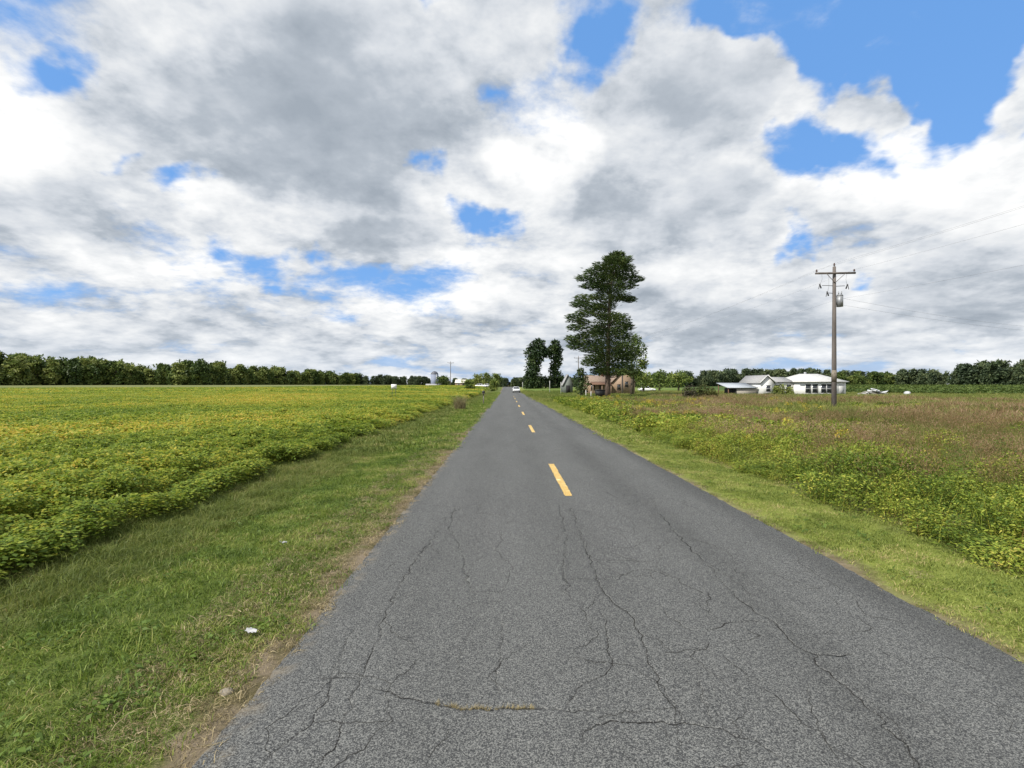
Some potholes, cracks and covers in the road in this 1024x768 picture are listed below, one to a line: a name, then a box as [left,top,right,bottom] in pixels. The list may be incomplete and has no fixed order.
crack [262,494,1024,768]
